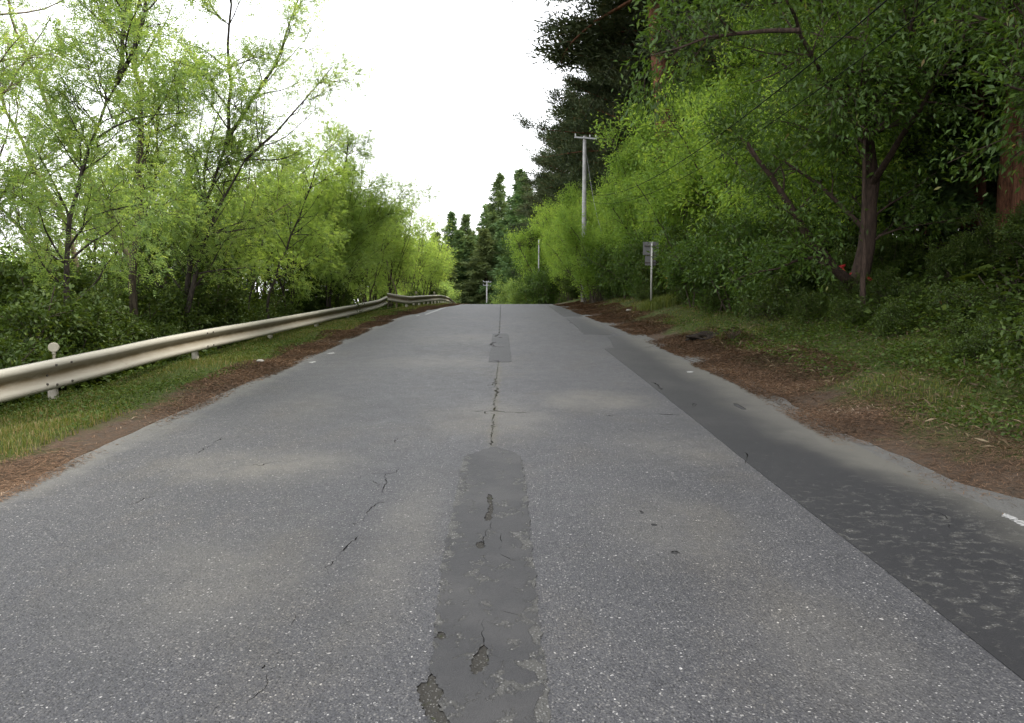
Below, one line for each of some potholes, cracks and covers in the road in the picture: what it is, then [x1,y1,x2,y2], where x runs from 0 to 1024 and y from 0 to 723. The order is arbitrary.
crack [484,306,521,434]
pothole [484,494,493,521]
pothole [470,646,489,675]
pothole [416,673,450,723]
